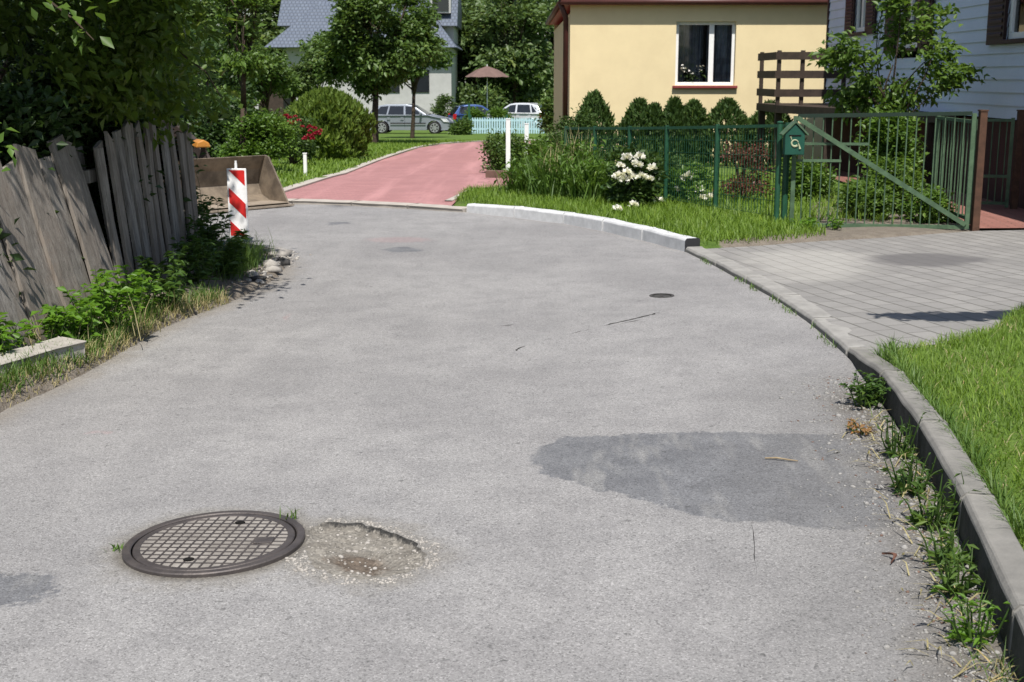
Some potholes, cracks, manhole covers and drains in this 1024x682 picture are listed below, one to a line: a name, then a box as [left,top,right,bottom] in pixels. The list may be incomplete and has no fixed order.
manhole cover [122,510,305,578]
pothole [278,517,440,584]
crack [516,312,659,351]
